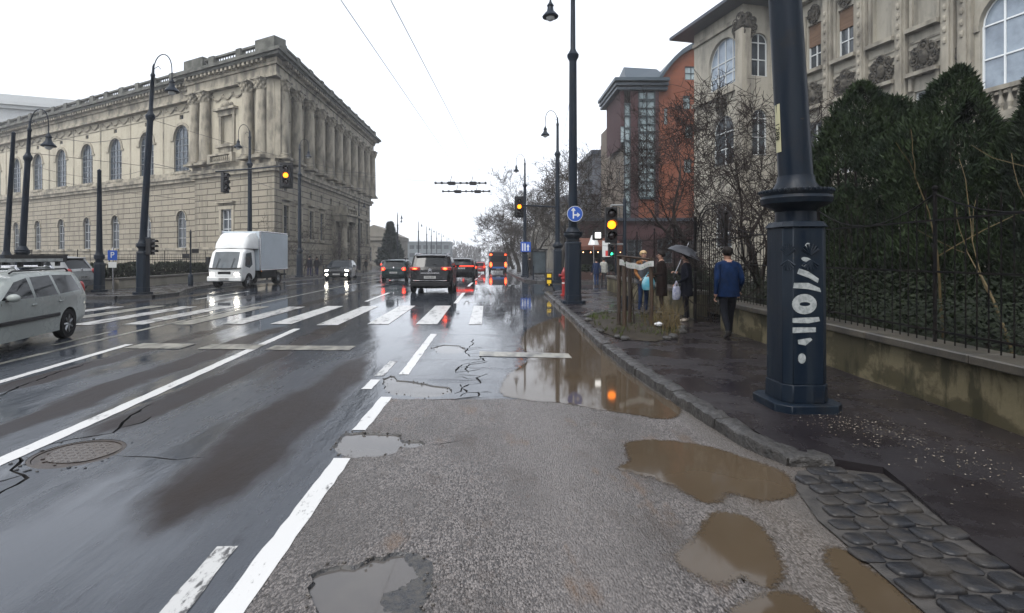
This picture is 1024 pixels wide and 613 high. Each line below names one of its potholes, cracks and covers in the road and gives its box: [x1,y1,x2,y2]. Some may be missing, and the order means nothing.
manhole cover [8,437,133,472]
crack [423,339,488,401]
pothole [330,431,425,458]
pothole [305,546,437,613]
crack [0,403,154,494]
